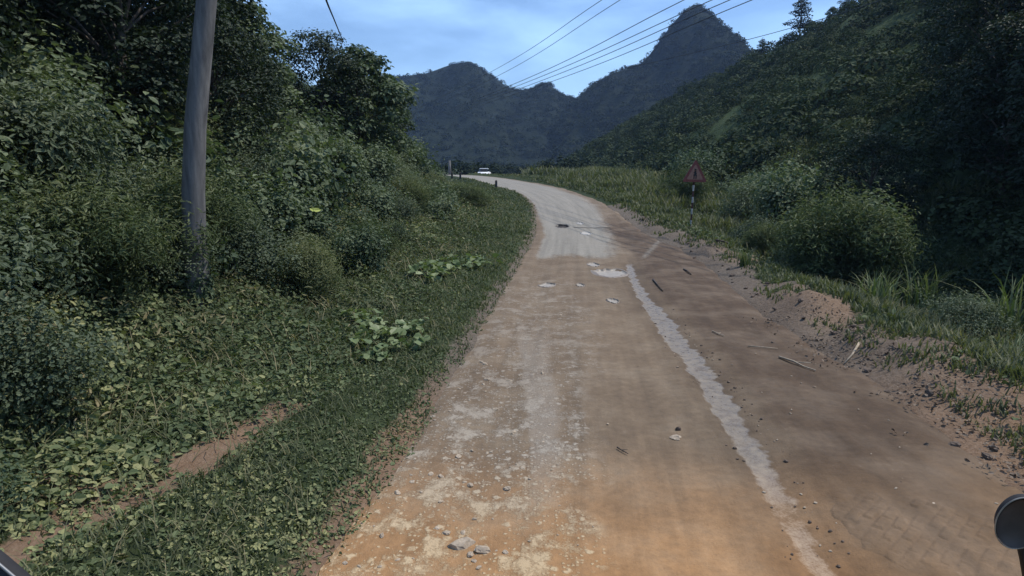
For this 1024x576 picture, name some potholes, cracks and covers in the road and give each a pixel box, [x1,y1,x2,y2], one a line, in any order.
pothole [590,268,629,278]
